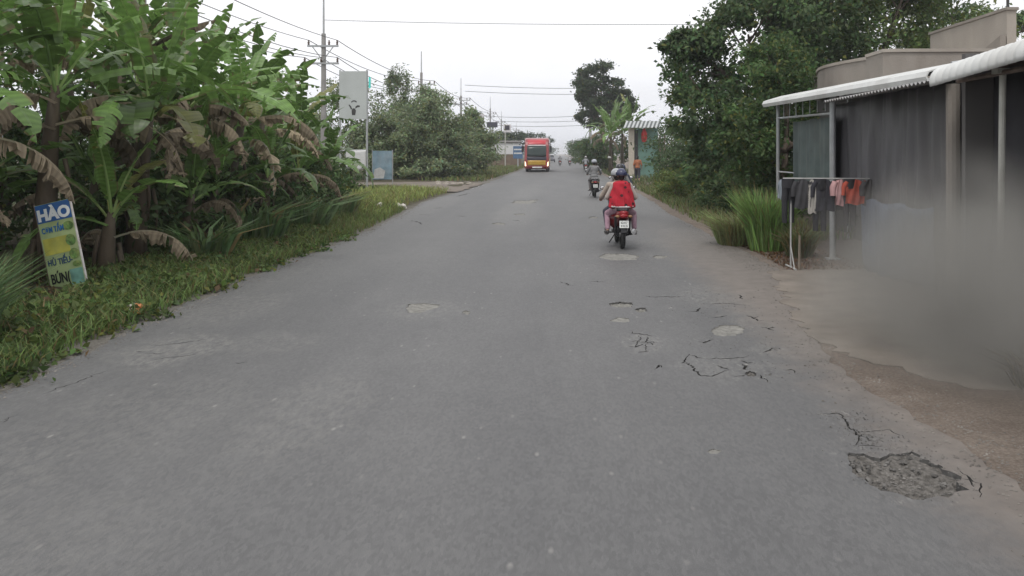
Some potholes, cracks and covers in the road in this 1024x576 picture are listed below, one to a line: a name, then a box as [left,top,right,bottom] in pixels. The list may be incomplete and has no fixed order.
crack [682,340,780,381]
crack [954,470,982,497]
crack [630,331,662,370]
pothole [847,451,969,500]
crack [831,413,904,447]
